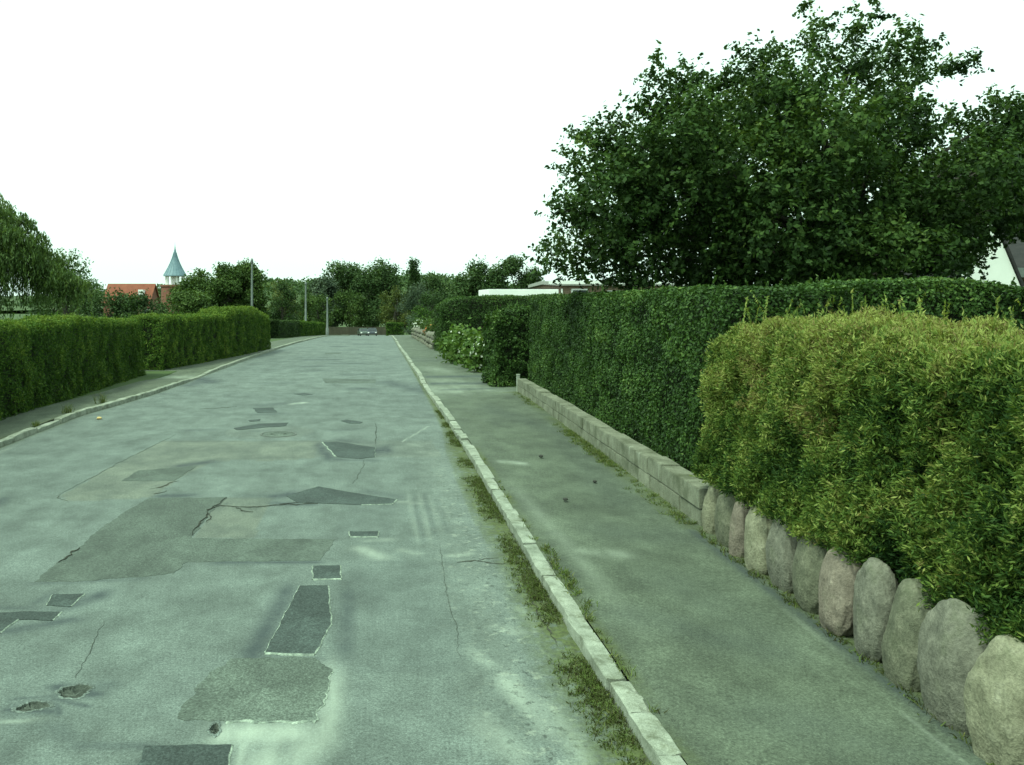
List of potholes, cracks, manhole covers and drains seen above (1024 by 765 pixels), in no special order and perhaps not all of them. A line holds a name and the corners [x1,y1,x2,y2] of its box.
pothole [55,682,96,700]
crack [439,545,501,654]
pothole [206,720,222,738]
crack [192,497,318,535]
pothole [10,700,55,713]
